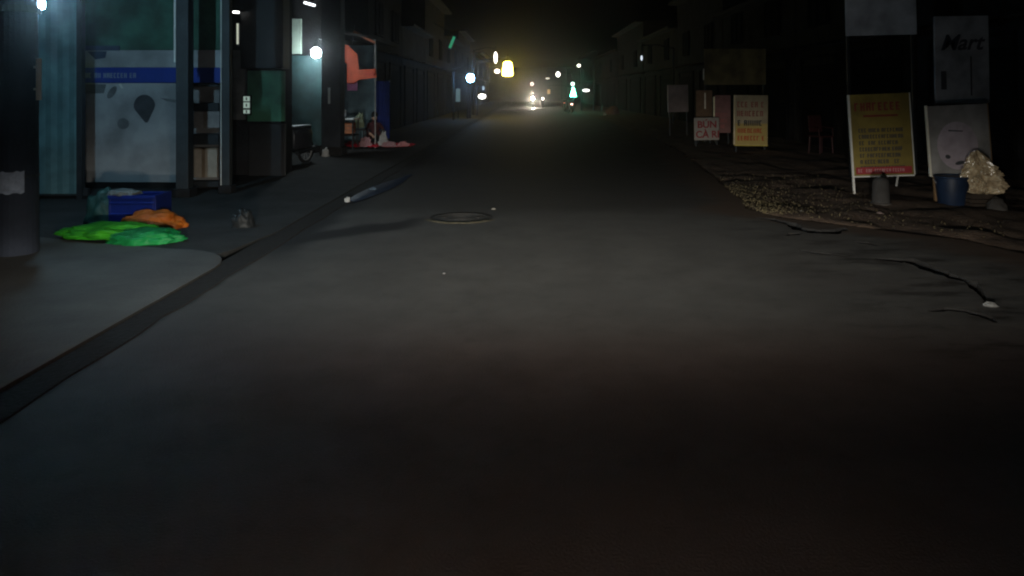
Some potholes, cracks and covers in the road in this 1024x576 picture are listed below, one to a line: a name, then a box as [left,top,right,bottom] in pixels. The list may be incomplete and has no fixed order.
manhole cover [424,213,496,224]
crack [756,217,998,323]
